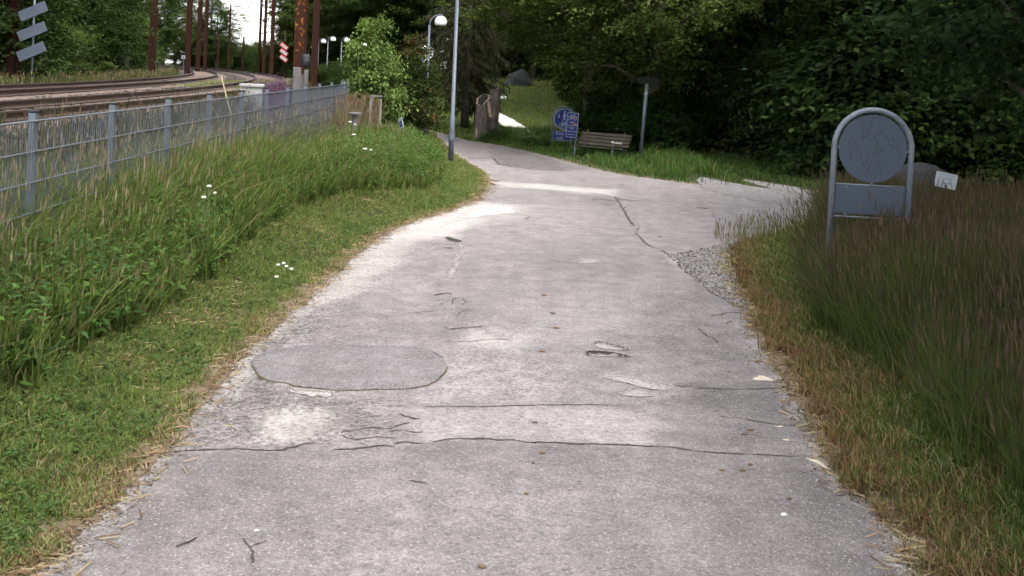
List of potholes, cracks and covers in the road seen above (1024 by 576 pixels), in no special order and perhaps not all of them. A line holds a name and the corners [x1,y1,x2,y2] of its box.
crack [250,293,794,457]
pothole [592,340,632,350]
crack [242,537,265,563]
